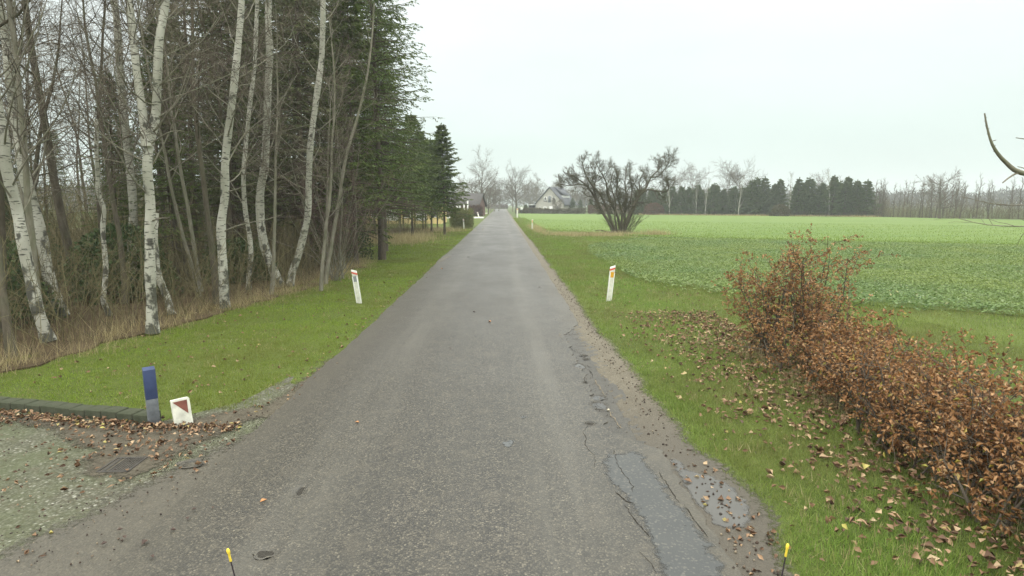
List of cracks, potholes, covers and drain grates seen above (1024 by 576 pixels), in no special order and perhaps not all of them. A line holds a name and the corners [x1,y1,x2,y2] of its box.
pothole [252,548,278,560]
drain grate [95,457,148,474]
crack [559,333,621,466]
crack [614,451,648,534]
